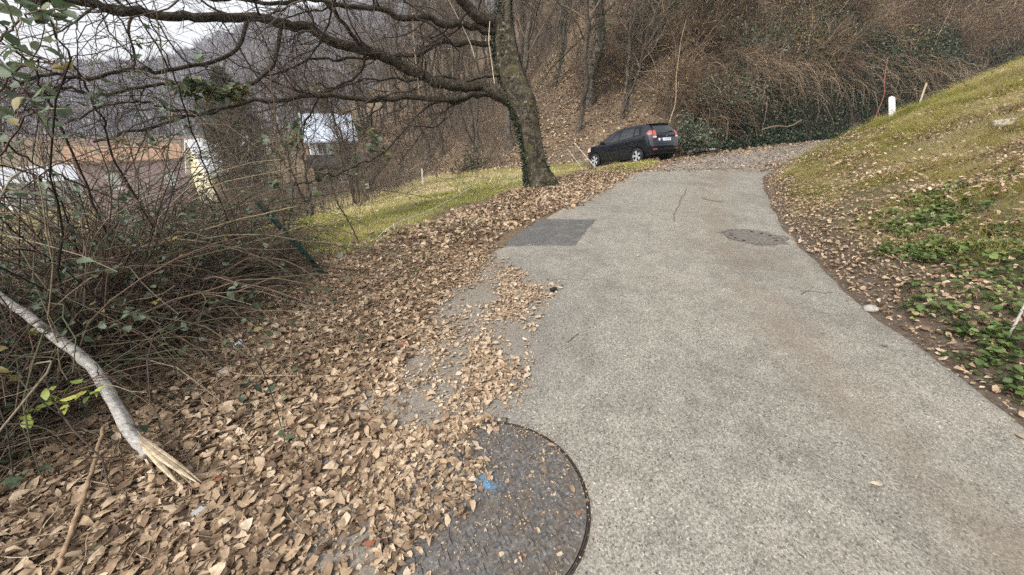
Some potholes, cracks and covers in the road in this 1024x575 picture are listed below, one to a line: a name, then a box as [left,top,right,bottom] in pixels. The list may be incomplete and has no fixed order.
manhole cover [716,228,790,248]
crack [673,188,688,222]
manhole cover [378,417,591,575]
